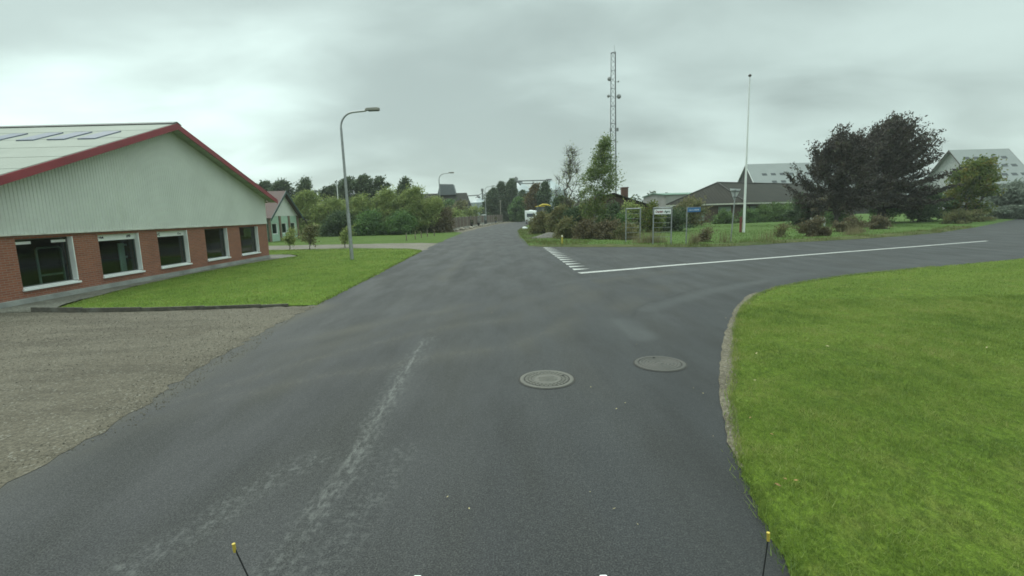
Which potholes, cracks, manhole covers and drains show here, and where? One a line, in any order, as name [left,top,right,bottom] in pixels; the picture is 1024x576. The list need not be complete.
manhole cover [633,356,688,372]
manhole cover [518,370,576,389]
